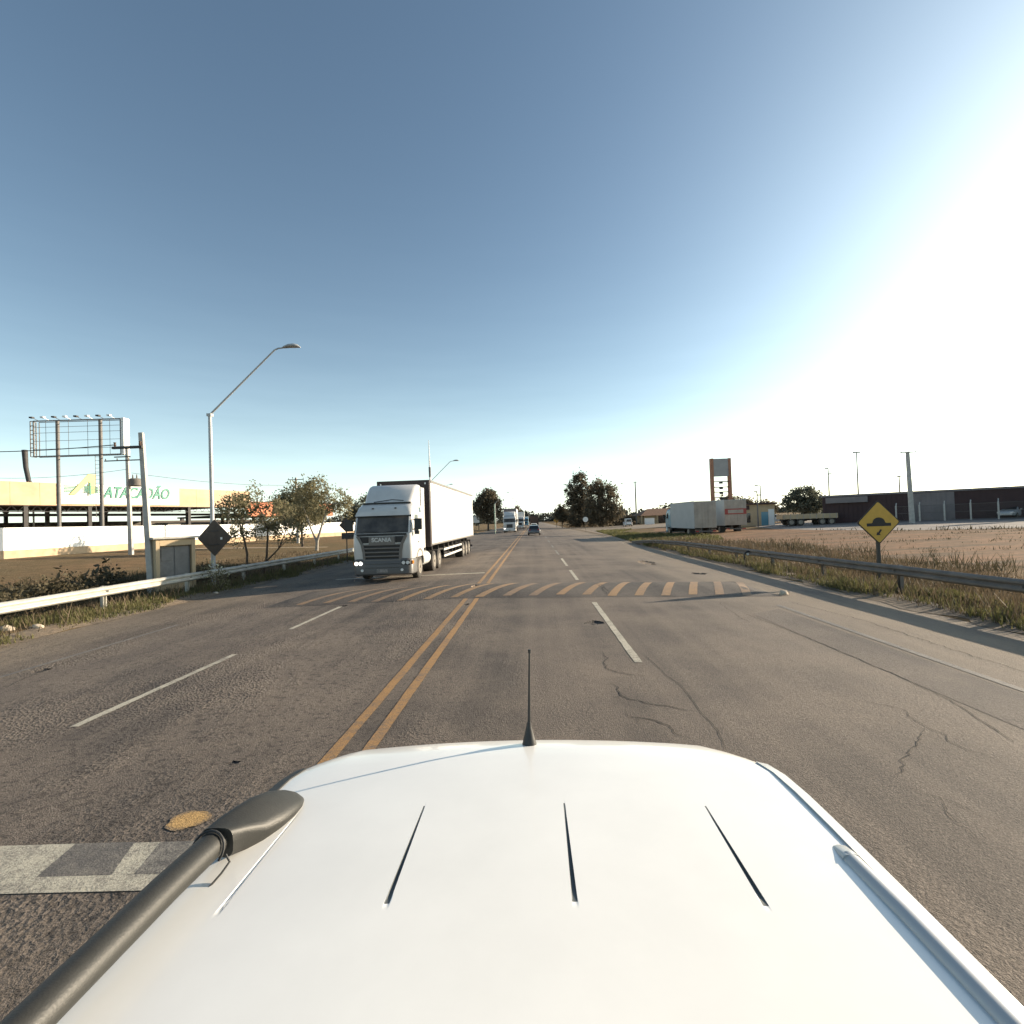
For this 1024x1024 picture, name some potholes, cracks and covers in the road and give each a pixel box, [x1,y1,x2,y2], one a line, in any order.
crack [789,601,1024,672]
crack [847,698,1008,843]
crack [603,653,695,739]
